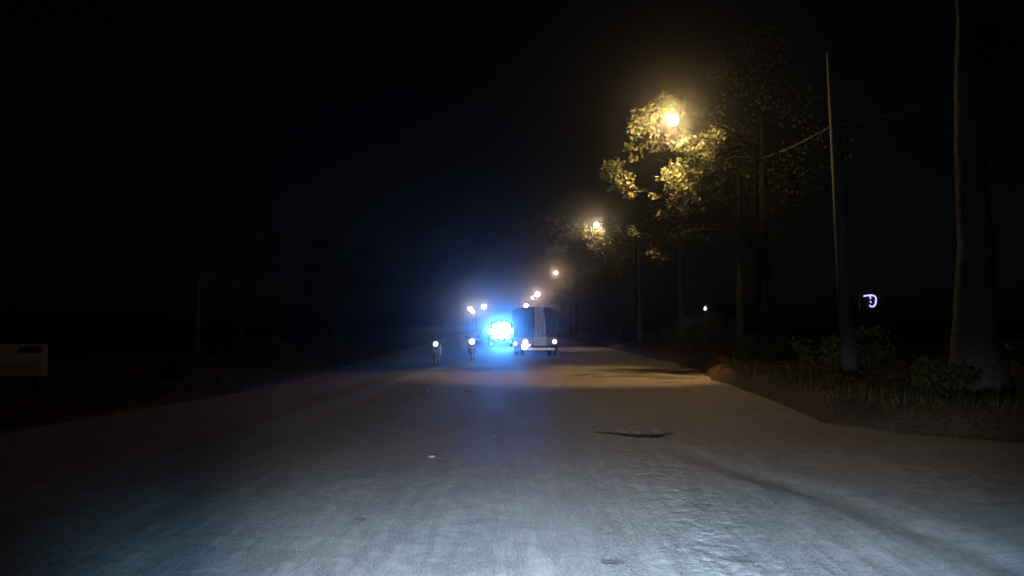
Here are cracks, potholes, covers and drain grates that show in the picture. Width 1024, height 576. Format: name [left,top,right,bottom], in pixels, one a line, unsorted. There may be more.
pothole [594,428,677,438]
pothole [600,557,627,565]
